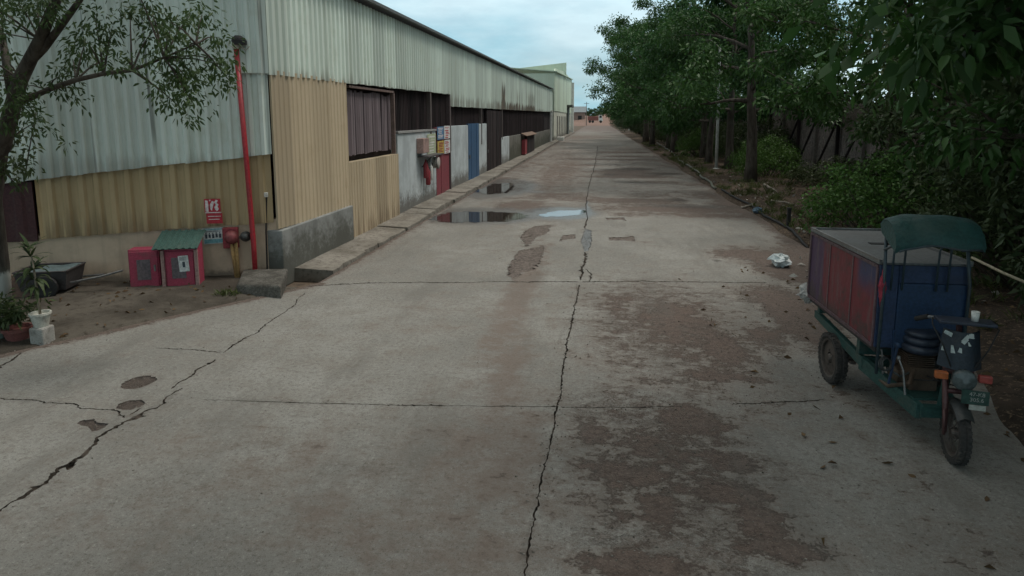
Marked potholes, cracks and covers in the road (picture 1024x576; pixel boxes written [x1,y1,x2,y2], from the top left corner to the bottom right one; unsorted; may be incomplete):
crack [523,146,598,576]
crack [0,293,305,511]
